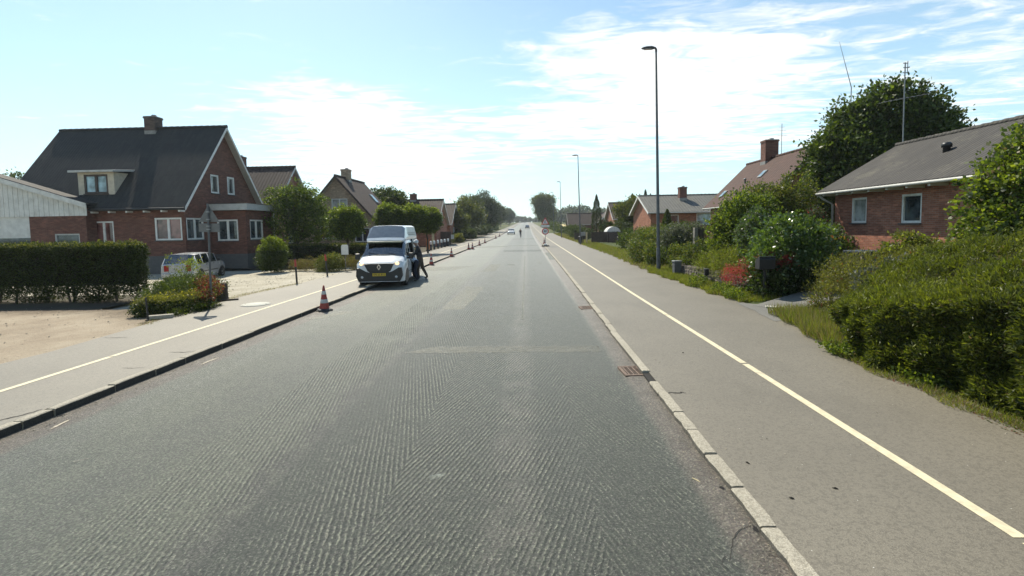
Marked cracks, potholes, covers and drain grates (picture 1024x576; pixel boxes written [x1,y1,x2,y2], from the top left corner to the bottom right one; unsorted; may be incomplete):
drain grate [617,366,643,377]
